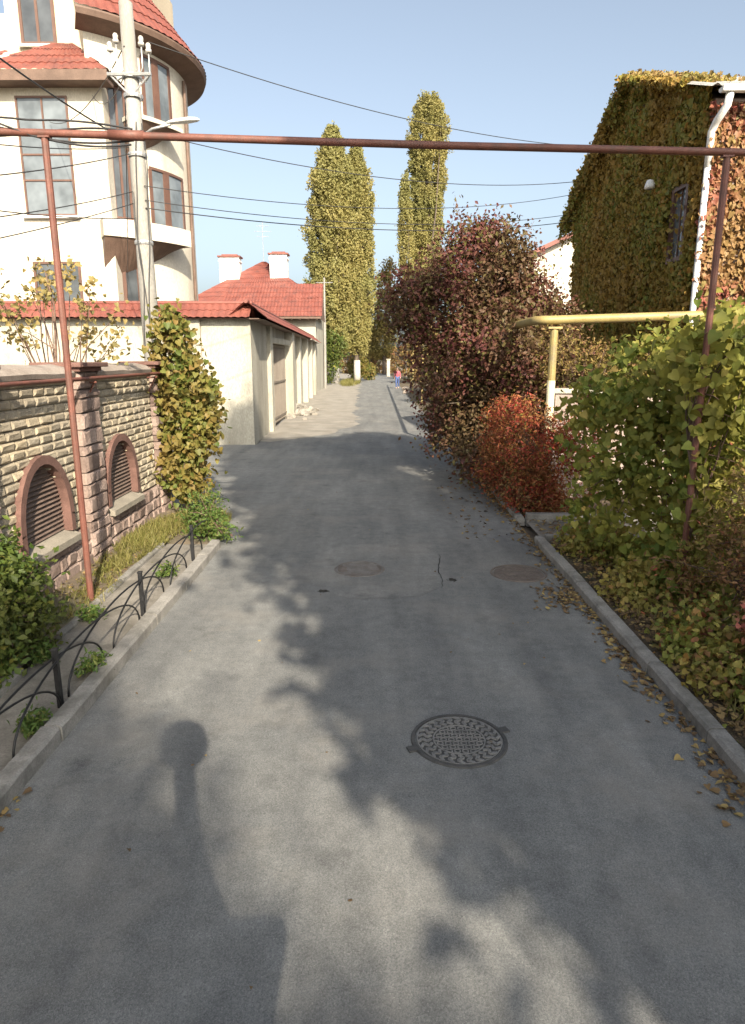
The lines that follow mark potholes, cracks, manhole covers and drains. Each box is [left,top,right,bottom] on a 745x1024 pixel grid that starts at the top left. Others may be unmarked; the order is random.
manhole cover [406,714,510,769]
manhole cover [490,564,547,583]
manhole cover [334,561,385,577]
